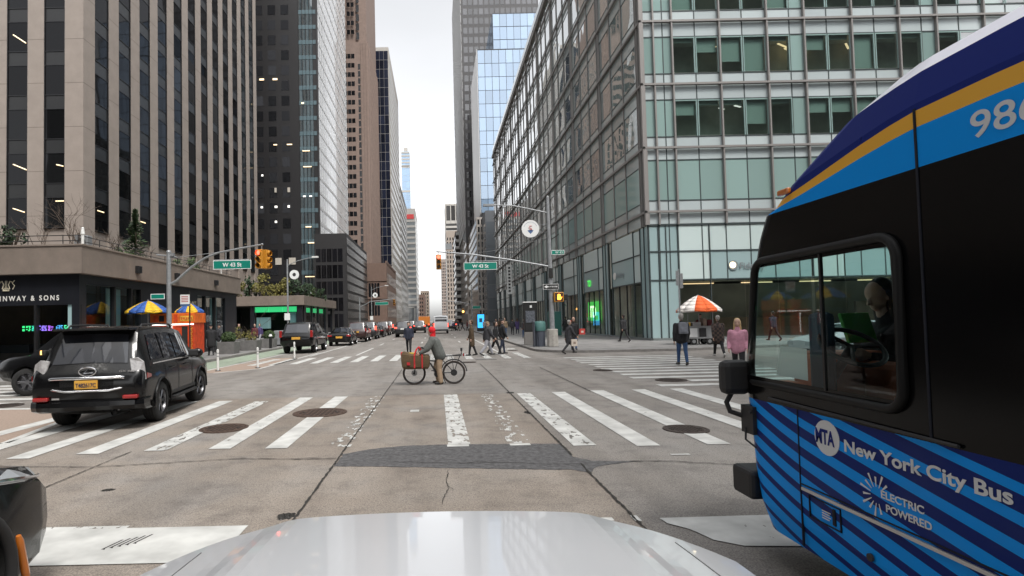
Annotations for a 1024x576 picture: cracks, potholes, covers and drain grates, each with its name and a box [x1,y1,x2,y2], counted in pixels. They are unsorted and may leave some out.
manhole cover [663,424,710,434]
manhole cover [292,408,347,418]
manhole cover [198,423,249,433]
